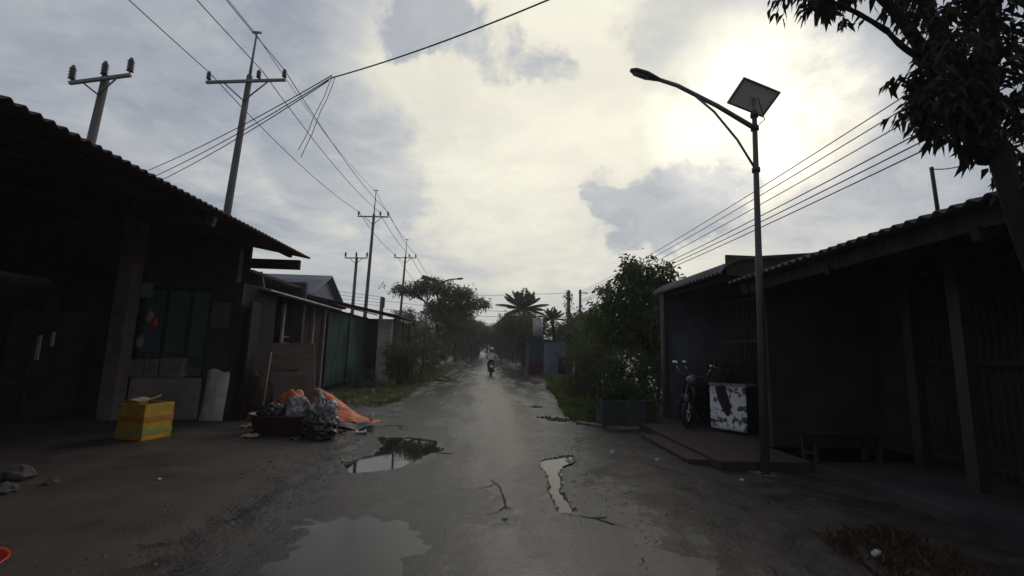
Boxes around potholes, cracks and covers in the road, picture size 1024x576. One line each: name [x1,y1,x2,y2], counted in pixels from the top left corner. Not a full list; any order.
pothole [340,437,444,473]
crack [481,479,510,514]
pothole [539,455,578,512]
crack [563,512,626,527]
